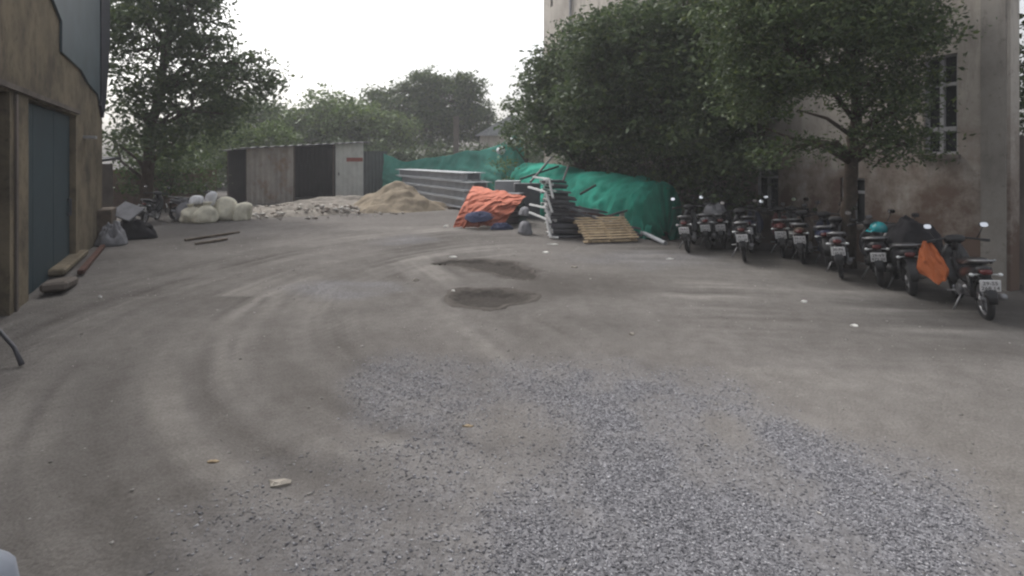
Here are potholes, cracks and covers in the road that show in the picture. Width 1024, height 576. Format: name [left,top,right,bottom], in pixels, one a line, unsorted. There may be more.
pothole [444,287,542,311]
pothole [433,258,539,280]
